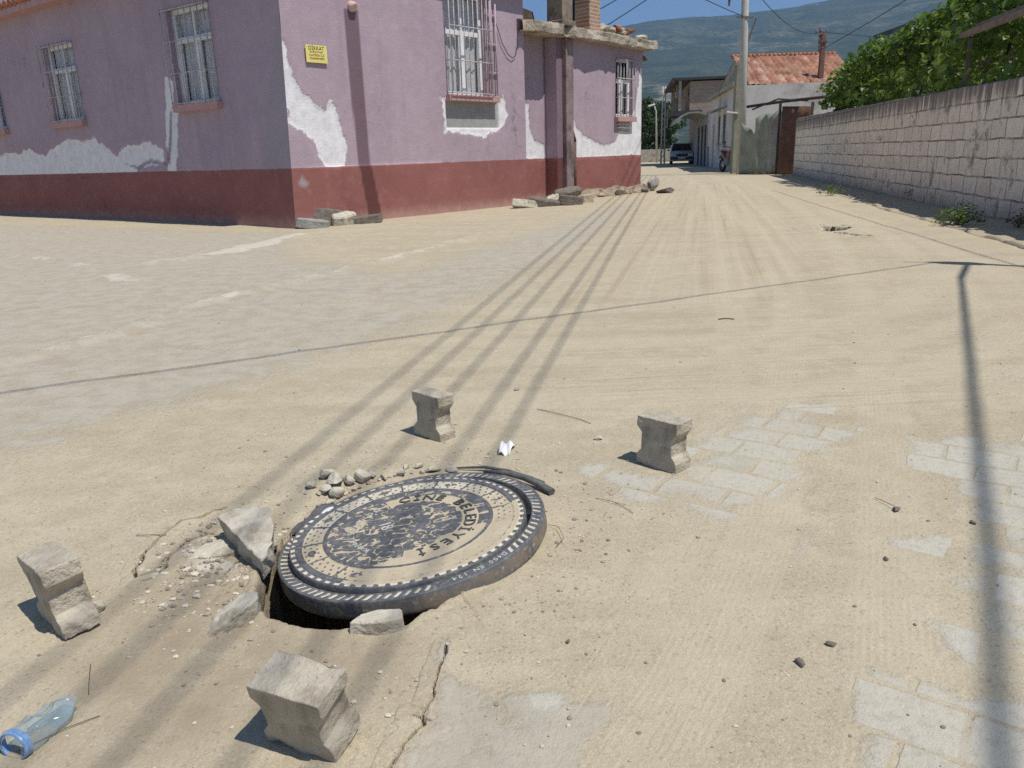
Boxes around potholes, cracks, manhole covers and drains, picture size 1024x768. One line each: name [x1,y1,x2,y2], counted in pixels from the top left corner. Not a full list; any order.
pothole [792,223,900,240]
crack [119,502,251,597]
manhole cover [277,472,547,620]
crack [370,633,467,768]
